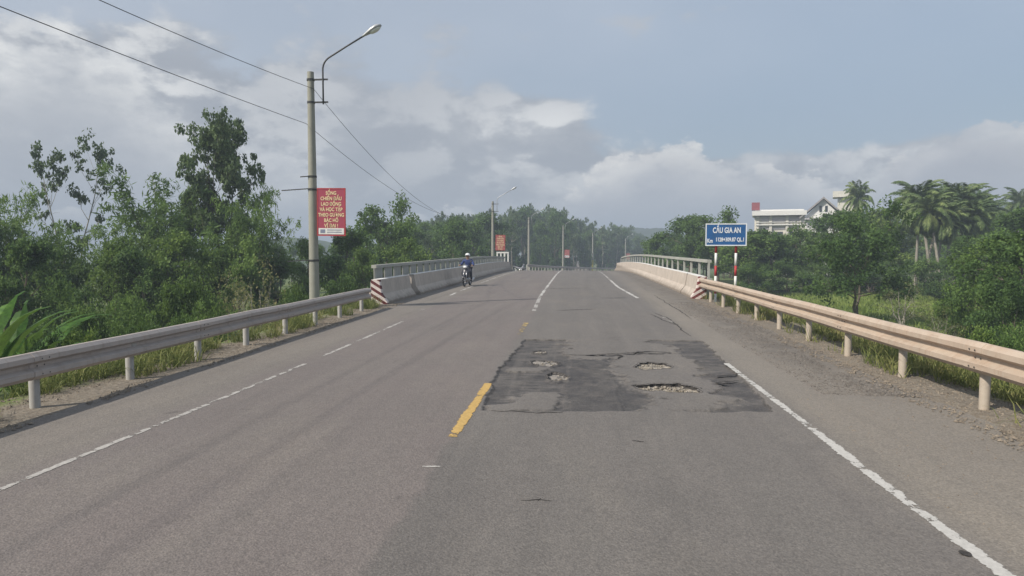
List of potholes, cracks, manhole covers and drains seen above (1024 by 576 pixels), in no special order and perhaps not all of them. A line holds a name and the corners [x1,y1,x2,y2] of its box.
crack [569,351,666,359]
crack [651,296,693,336]
pothole [633,383,703,393]
pothole [635,361,674,370]
pothole [547,372,569,381]
